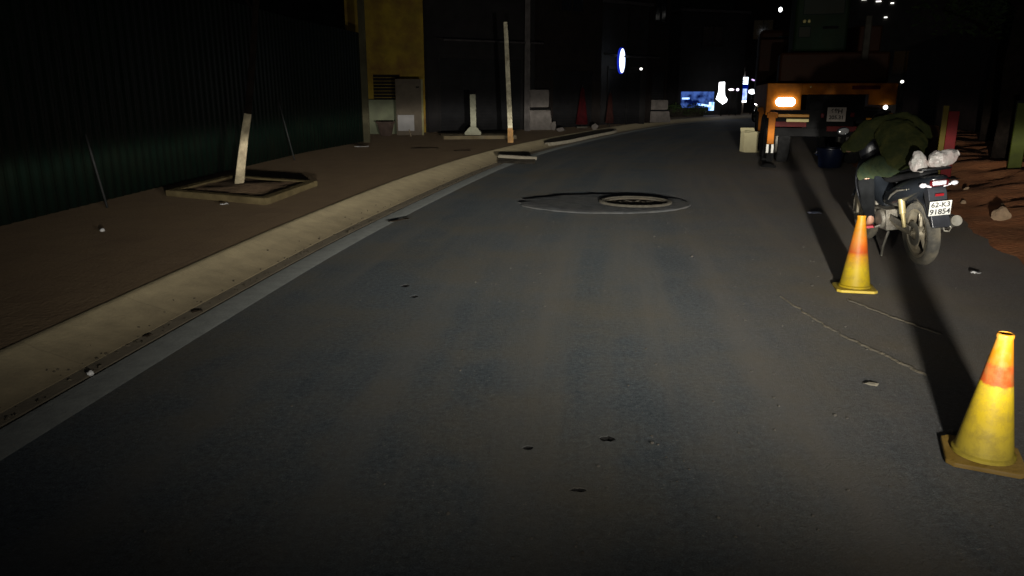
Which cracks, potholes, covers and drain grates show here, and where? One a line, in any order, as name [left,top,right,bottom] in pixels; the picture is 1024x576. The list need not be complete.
crack [780,296,942,376]
manhole cover [599,196,672,208]
